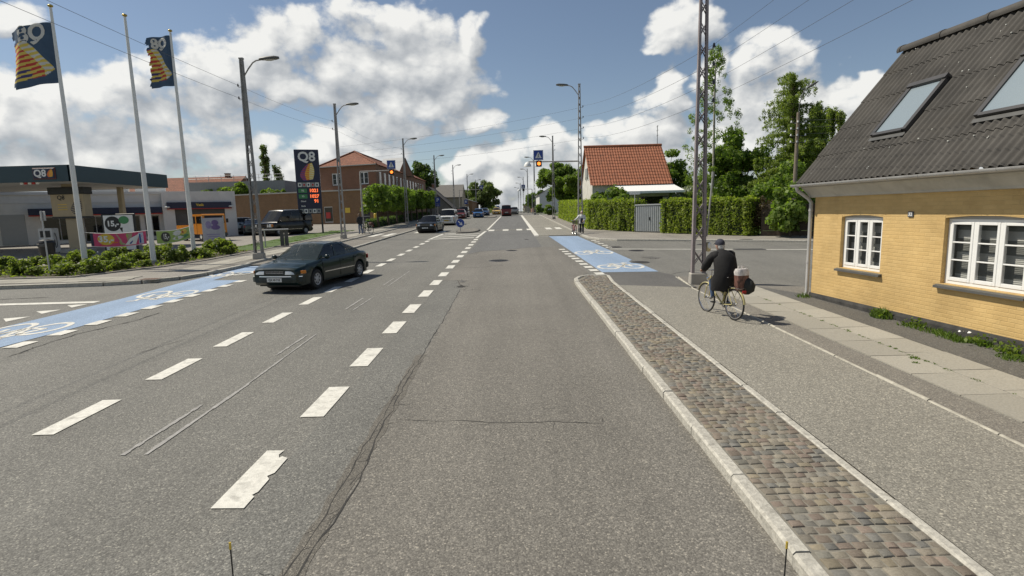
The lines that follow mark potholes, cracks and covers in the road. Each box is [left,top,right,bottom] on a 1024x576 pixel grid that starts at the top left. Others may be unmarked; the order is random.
crack [258,249,603,576]
